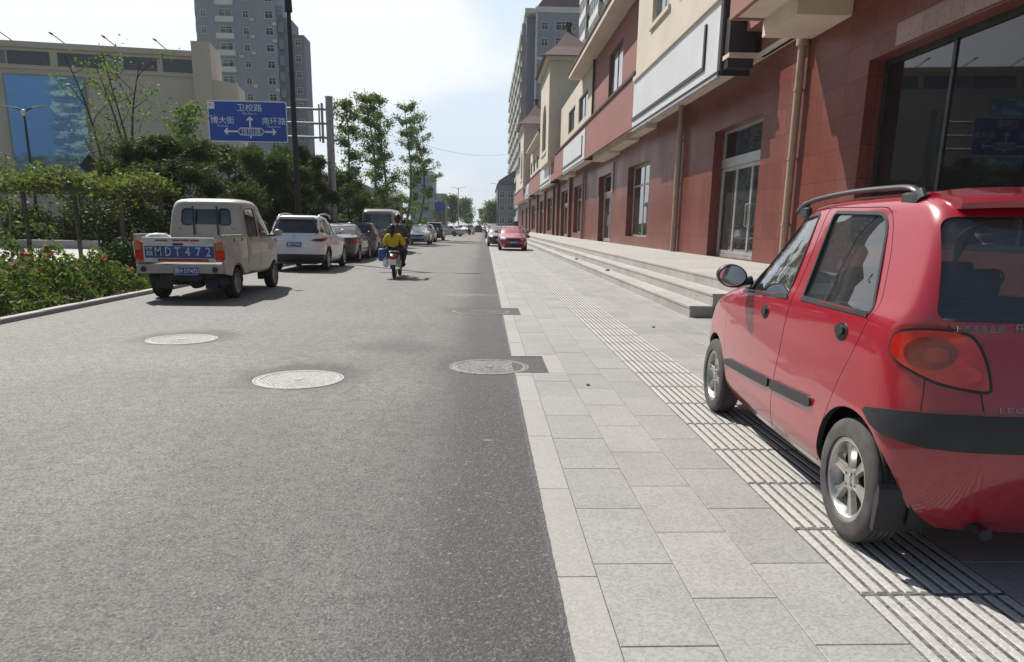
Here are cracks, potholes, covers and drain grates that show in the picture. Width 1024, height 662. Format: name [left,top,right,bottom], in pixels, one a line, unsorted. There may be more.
manhole cover [252,370,344,389]
manhole cover [145,334,218,345]
manhole cover [449,359,529,375]
